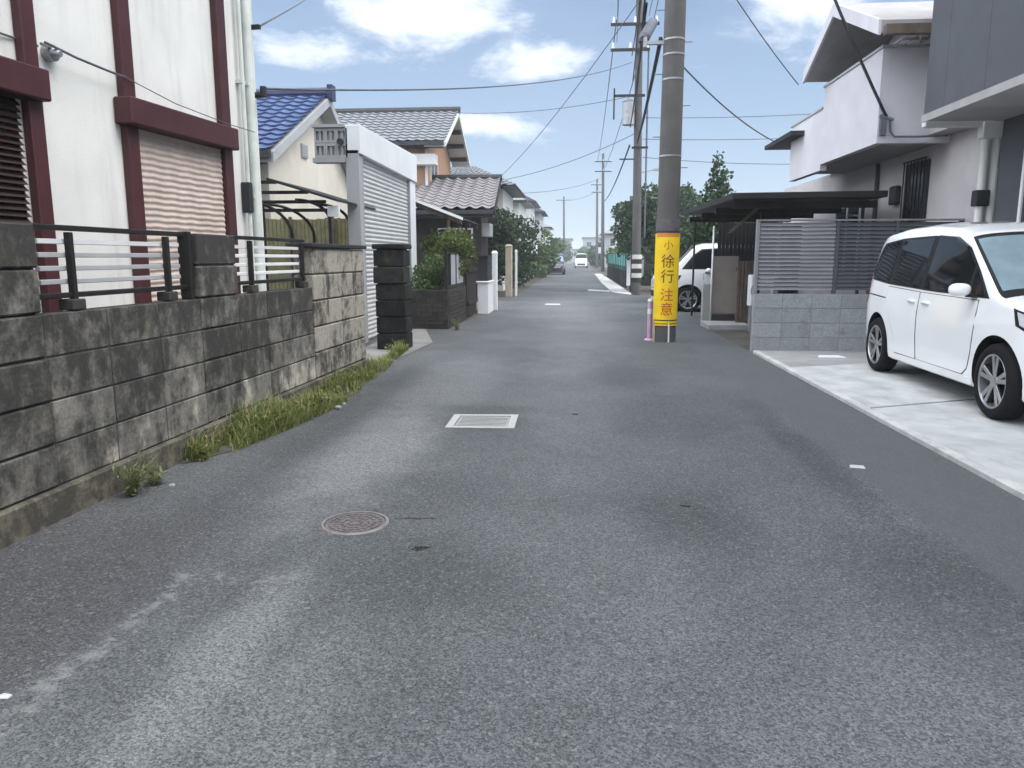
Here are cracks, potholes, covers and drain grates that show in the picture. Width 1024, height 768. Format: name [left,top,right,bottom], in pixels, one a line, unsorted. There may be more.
manhole cover [320,511,389,535]
